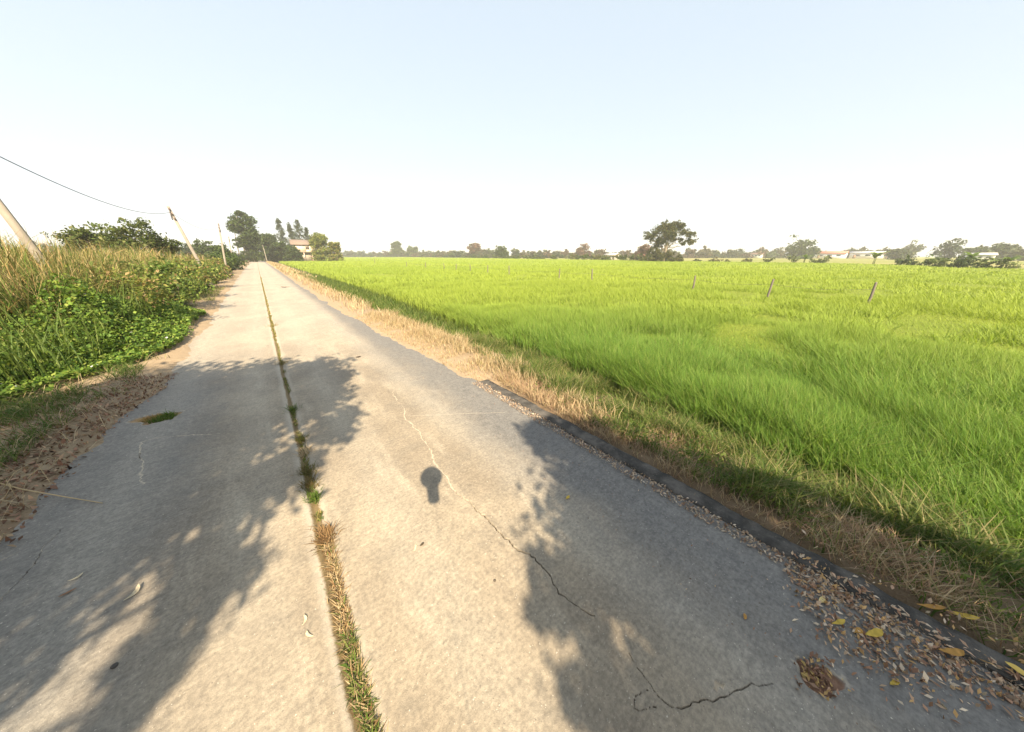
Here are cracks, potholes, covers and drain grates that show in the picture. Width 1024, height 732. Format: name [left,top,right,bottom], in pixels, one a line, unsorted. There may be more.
crack [0,525,69,611]
crack [623,647,785,721]
crack [134,432,224,485]
pothole [116,408,192,428]
pothole [785,649,868,709]
crack [390,391,601,622]
